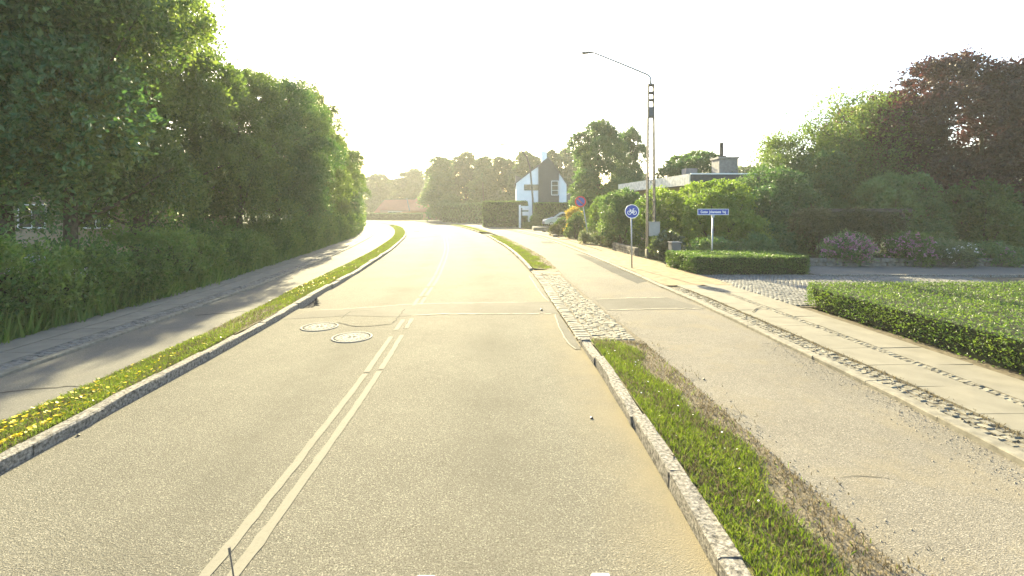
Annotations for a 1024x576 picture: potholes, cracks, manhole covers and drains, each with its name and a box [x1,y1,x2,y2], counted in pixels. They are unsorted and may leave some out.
manhole cover [300,322,339,332]
manhole cover [331,332,373,343]
